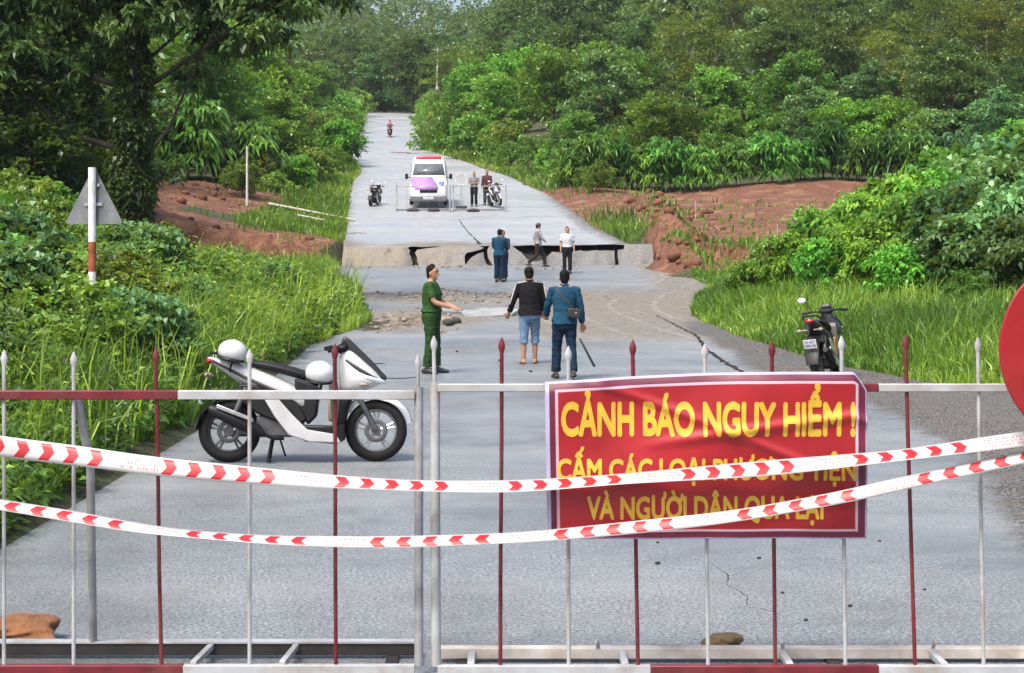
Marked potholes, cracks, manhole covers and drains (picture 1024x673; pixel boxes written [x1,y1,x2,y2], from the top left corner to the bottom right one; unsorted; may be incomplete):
pothole [356,315,461,331]
crack [460,221,492,265]
crack [408,246,440,266]
crack [656,315,744,372]
